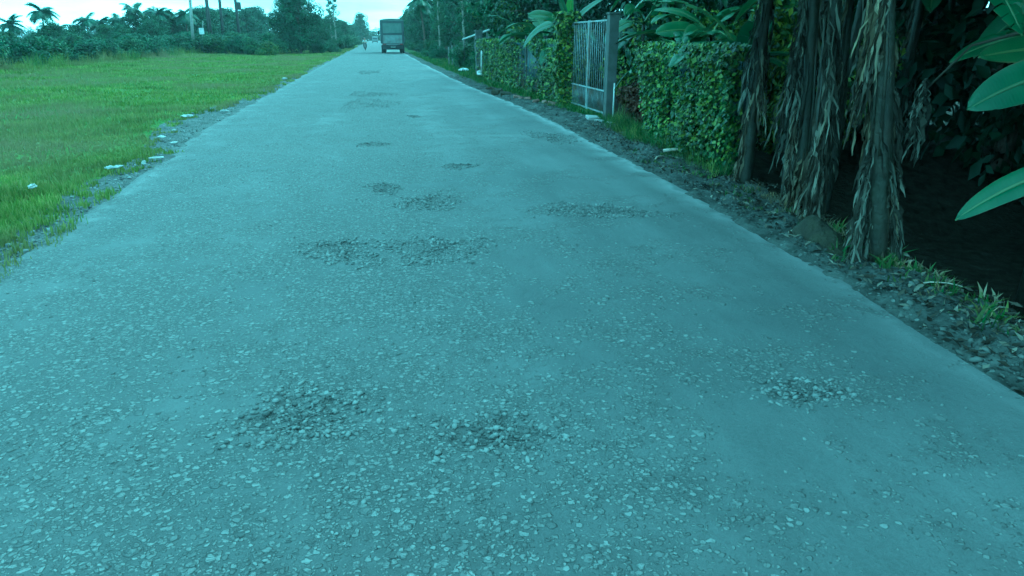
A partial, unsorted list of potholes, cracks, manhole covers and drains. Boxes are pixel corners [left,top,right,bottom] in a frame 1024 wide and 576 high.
pothole [392,190,464,212]
pothole [416,405,584,463]
pothole [197,380,416,455]
pothole [362,182,405,197]
pothole [288,235,385,270]
pothole [525,201,688,220]
pothole [750,371,880,414]
pothole [343,97,400,110]
pothole [377,235,497,266]
pothole [441,163,483,171]
pothole [520,130,582,146]
